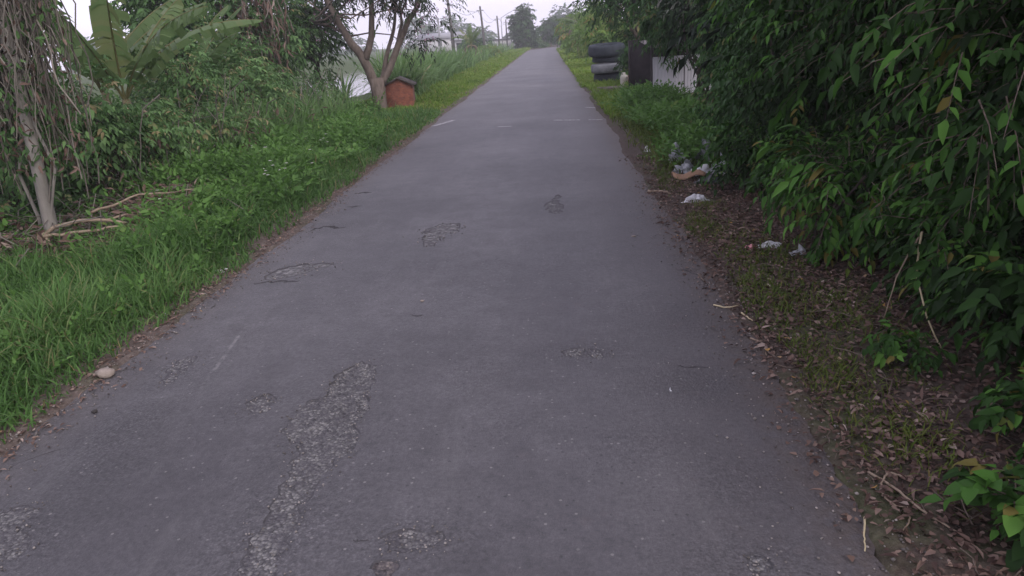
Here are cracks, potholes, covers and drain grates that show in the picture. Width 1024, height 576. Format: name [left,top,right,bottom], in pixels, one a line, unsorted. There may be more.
pothole [421,223,461,247]
pothole [380,528,446,554]
pothole [747,552,774,573]
pothole [561,347,604,359]
pothole [236,361,377,576]
pothole [264,263,334,281]
pothole [0,505,44,561]
pothole [544,195,564,214]
